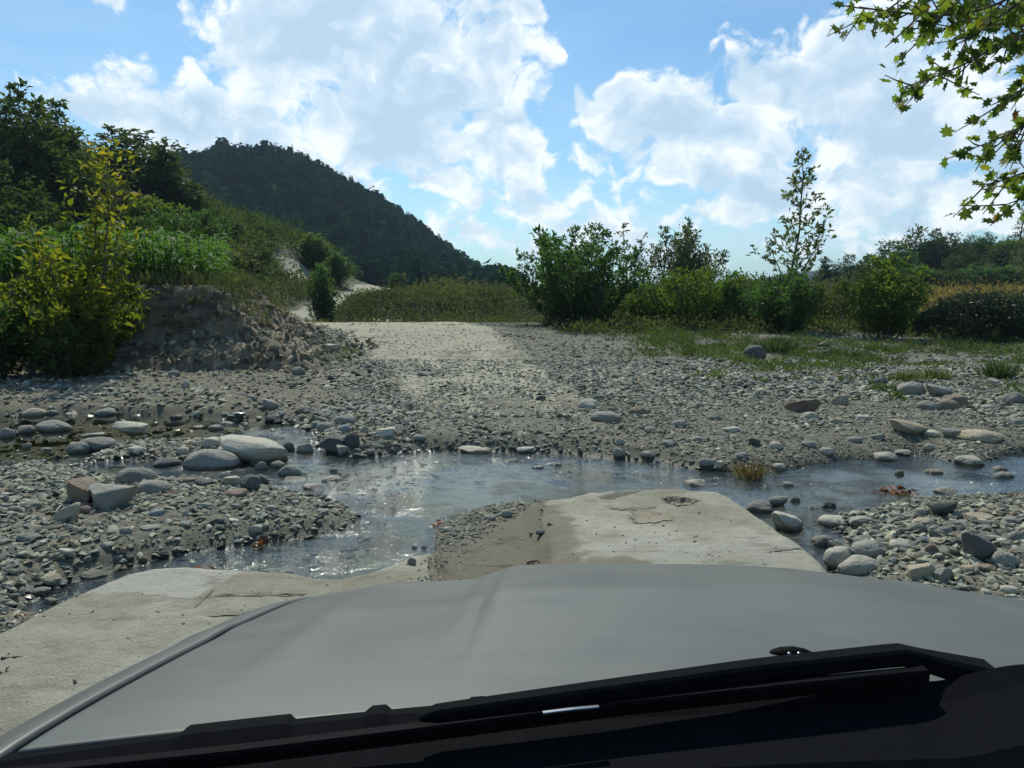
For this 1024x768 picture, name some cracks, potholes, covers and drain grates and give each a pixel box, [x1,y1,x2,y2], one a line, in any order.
crack [194,589,305,617]
pothole [663,496,699,507]
